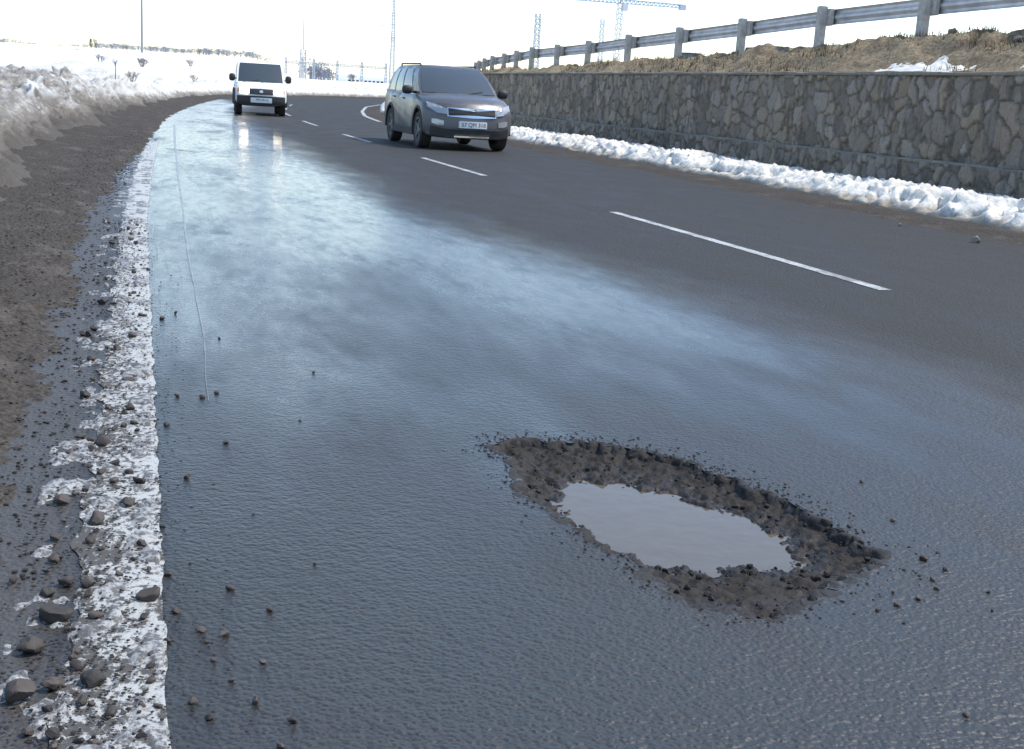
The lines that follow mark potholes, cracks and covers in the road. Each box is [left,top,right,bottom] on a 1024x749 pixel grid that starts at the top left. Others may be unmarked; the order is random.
pothole [486,437,892,622]
crack [169,124,209,400]
